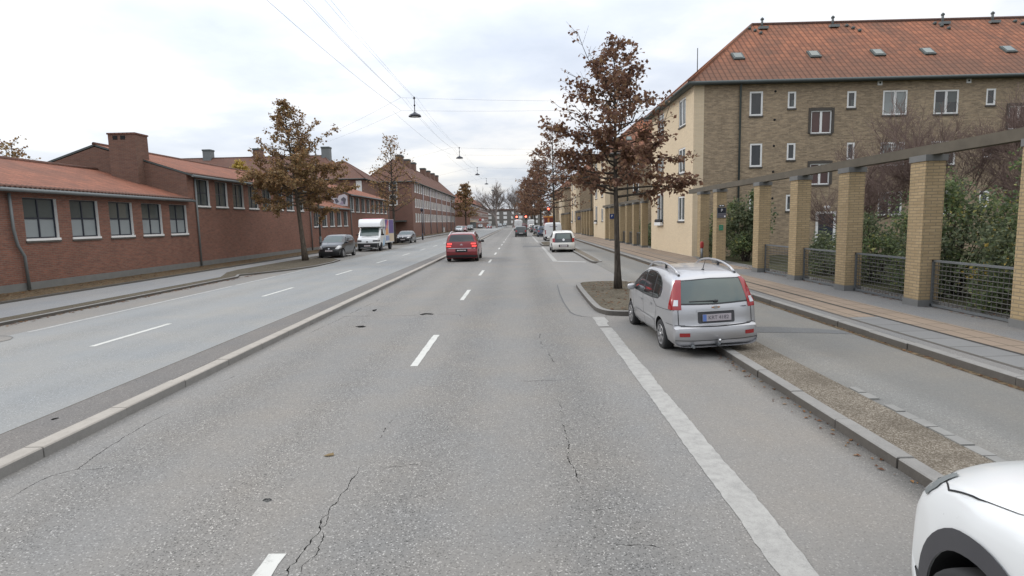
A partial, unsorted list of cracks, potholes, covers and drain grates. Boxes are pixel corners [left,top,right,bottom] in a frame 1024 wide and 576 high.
crack [286,467,360,576]
crack [13,411,173,497]
